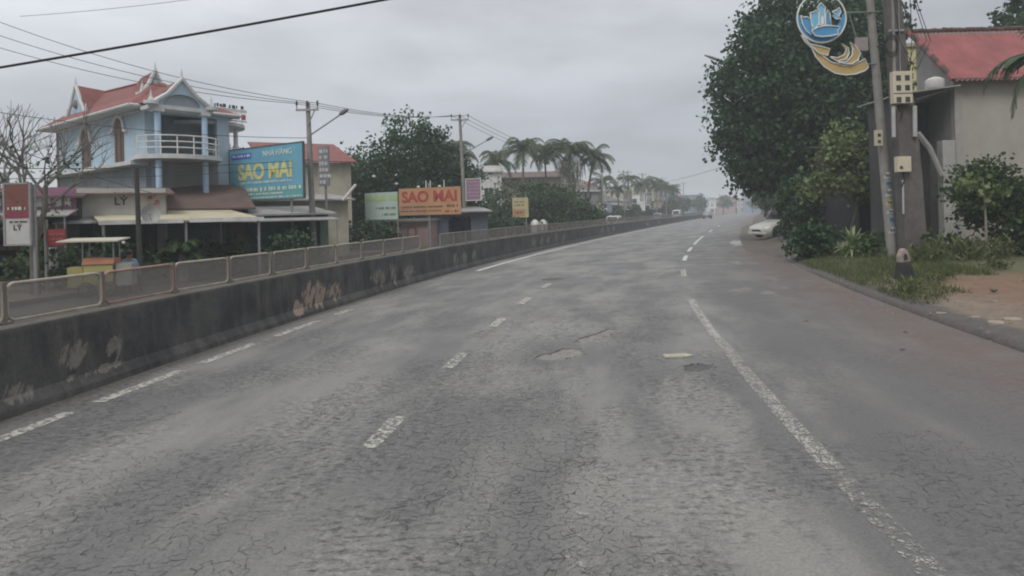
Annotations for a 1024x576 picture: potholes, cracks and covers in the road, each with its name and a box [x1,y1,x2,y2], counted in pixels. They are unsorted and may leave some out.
pothole [534,348,587,360]
crack [478,308,680,348]
pothole [684,363,717,372]
